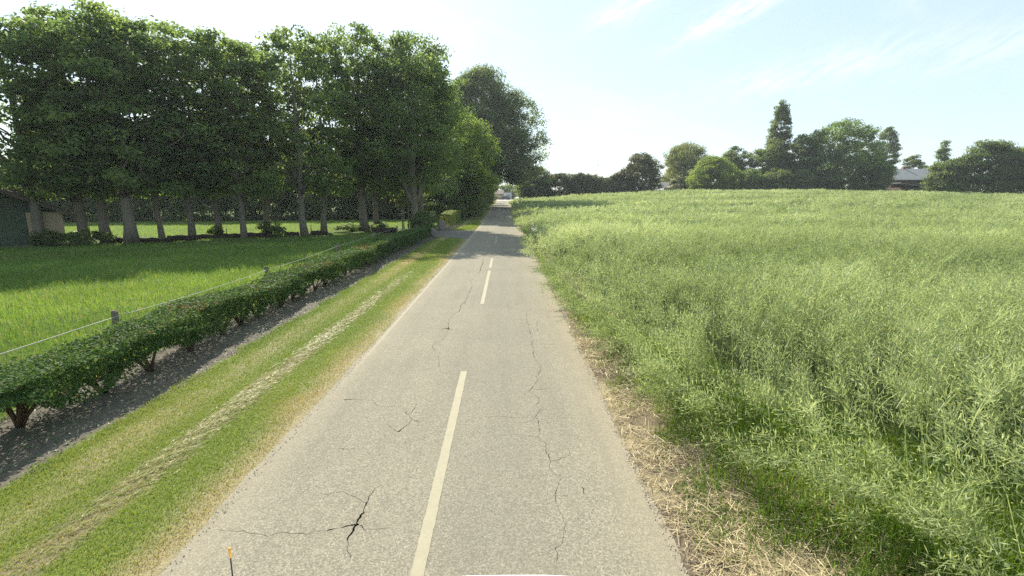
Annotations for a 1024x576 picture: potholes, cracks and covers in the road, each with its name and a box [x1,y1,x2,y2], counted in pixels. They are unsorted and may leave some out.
crack [223,486,386,558]
crack [501,308,571,562]
